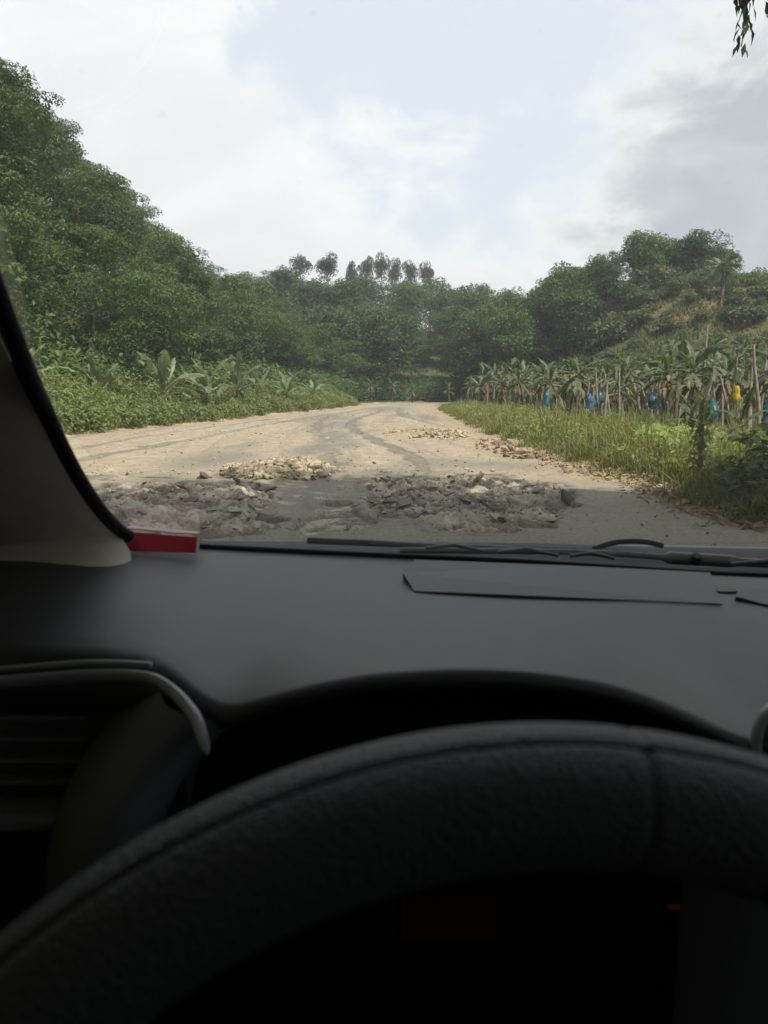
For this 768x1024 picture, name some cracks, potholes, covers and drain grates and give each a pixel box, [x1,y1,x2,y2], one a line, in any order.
pothole [94,478,285,540]
pothole [291,501,376,535]
pothole [359,472,580,535]
